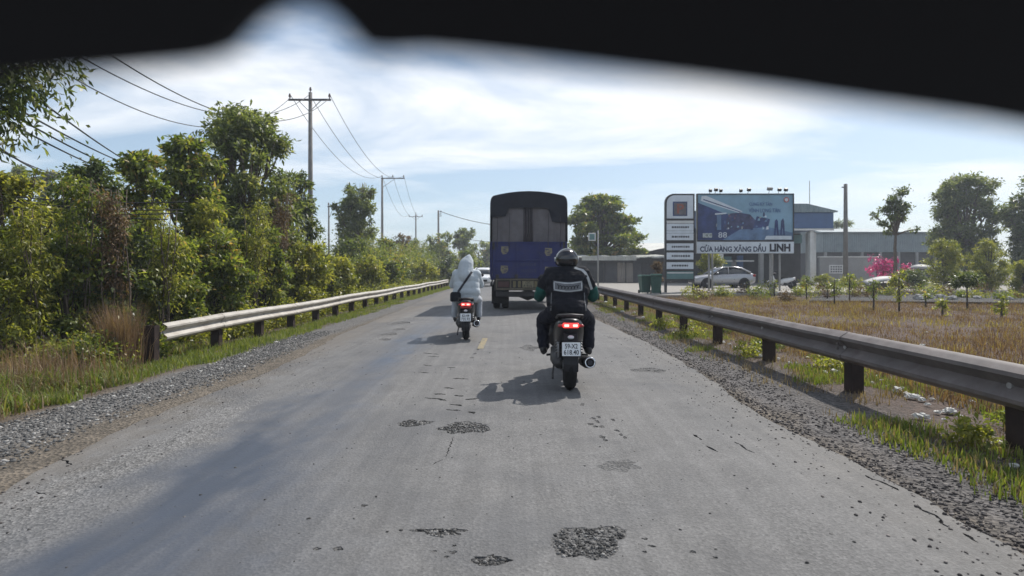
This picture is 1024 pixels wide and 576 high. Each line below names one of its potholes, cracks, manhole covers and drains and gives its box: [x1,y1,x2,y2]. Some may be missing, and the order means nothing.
pothole [551,526,628,561]
pothole [397,419,435,427]
pothole [409,528,469,538]
pothole [436,421,490,434]
crack [866,475,979,543]
pothole [470,554,513,566]
